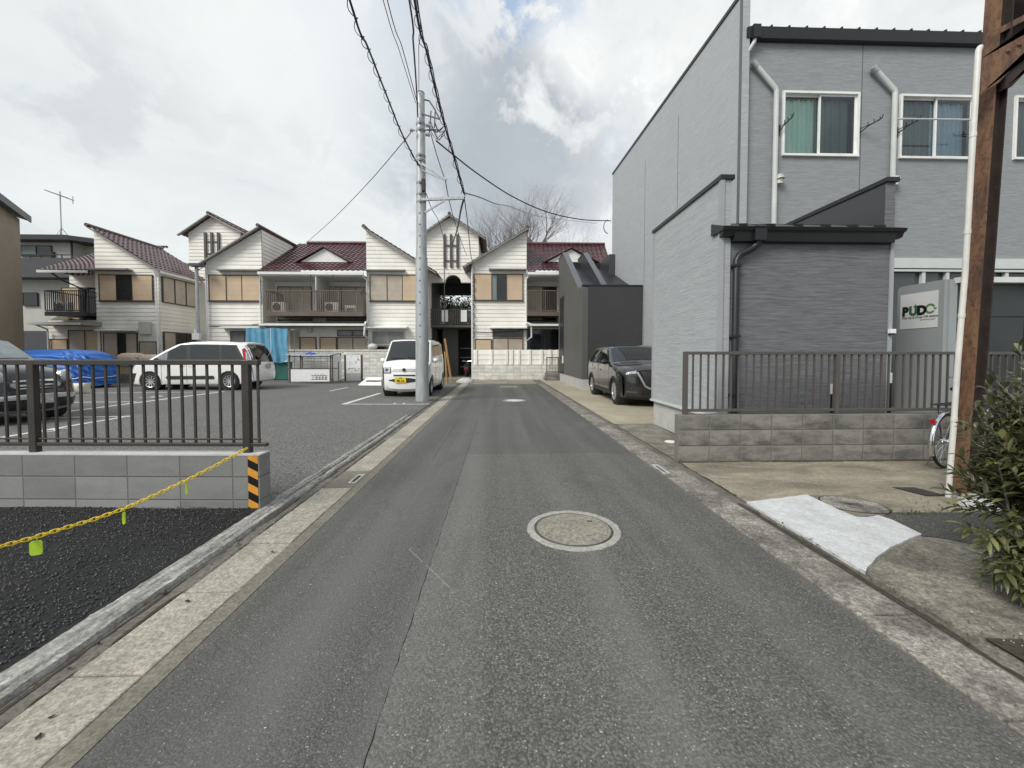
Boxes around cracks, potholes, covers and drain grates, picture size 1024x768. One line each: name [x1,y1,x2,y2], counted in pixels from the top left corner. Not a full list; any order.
crack [363,421,478,768]
manhole cover [527,510,621,552]
manhole cover [809,495,893,517]
drain grate [893,487,945,496]
